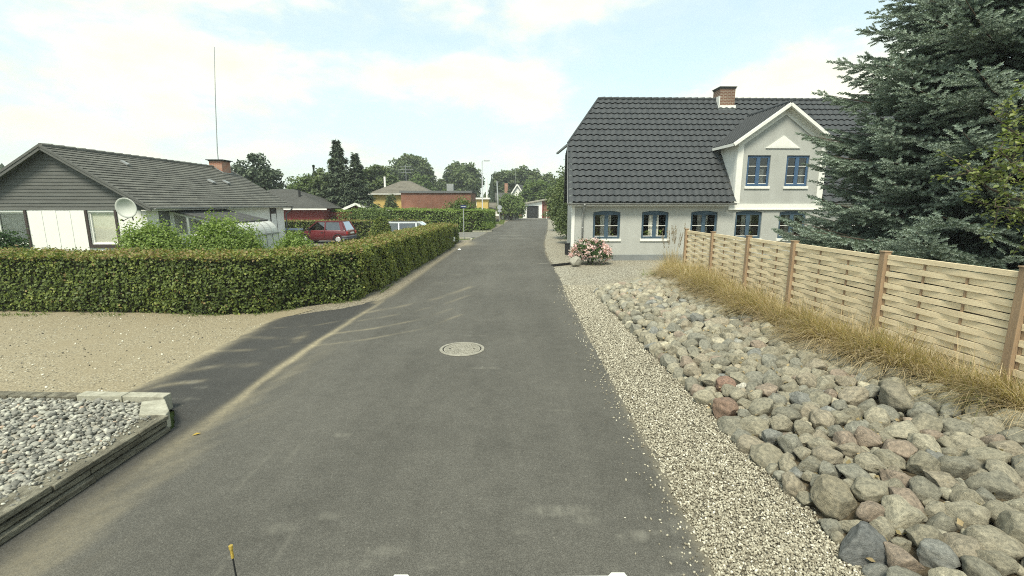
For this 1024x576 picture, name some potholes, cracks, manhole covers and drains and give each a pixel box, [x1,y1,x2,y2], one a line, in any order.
manhole cover [439,342,485,356]
